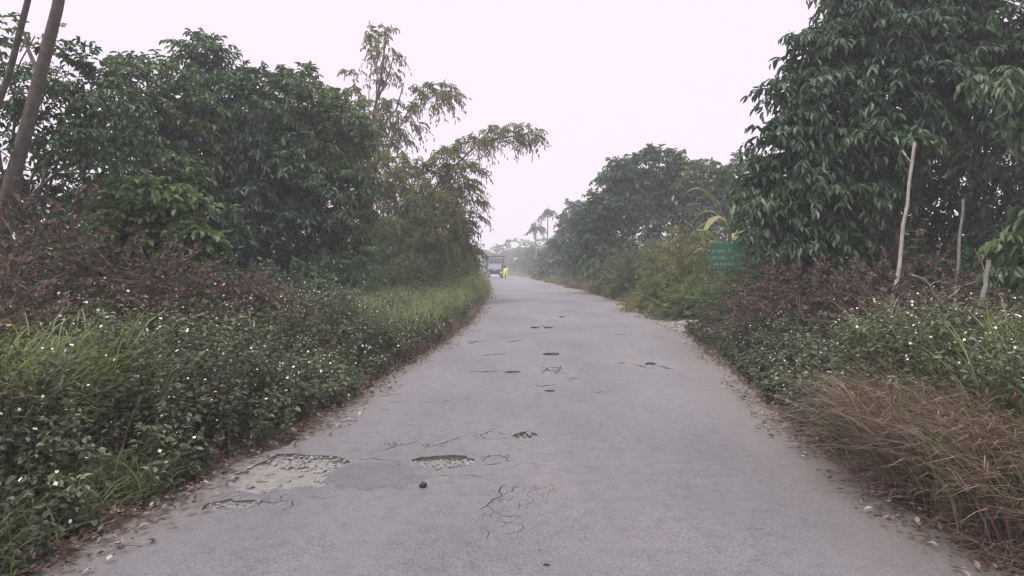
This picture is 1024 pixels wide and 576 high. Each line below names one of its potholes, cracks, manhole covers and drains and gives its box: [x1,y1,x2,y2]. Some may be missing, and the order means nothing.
pothole [409,455,477,470]
crack [536,366,578,387]
crack [219,493,336,514]
pothole [512,431,538,439]
crack [360,425,558,545]
pothole [224,453,350,494]
crack [468,341,515,372]
